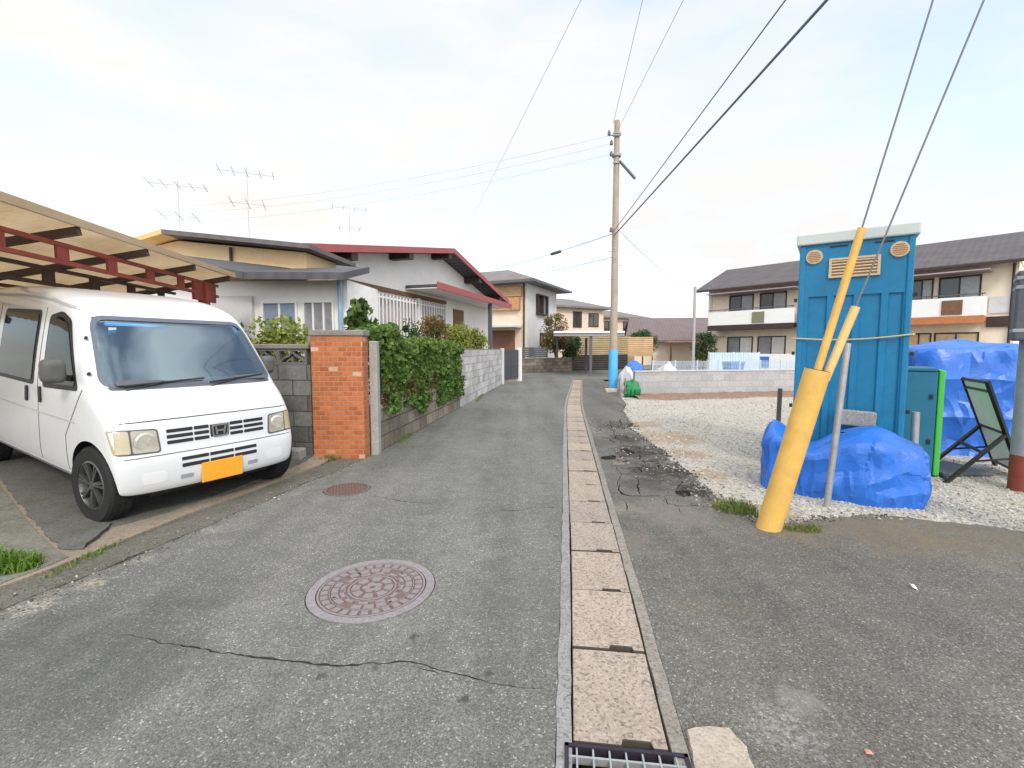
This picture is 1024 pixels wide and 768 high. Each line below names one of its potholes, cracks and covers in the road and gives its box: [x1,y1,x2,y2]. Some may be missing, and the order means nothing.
crack [123,634,543,689]
manhole cover [306,559,435,624]
crack [602,419,701,513]
crack [85,523,112,547]
manhole cover [323,482,370,496]
drain grate [565,742,692,768]
